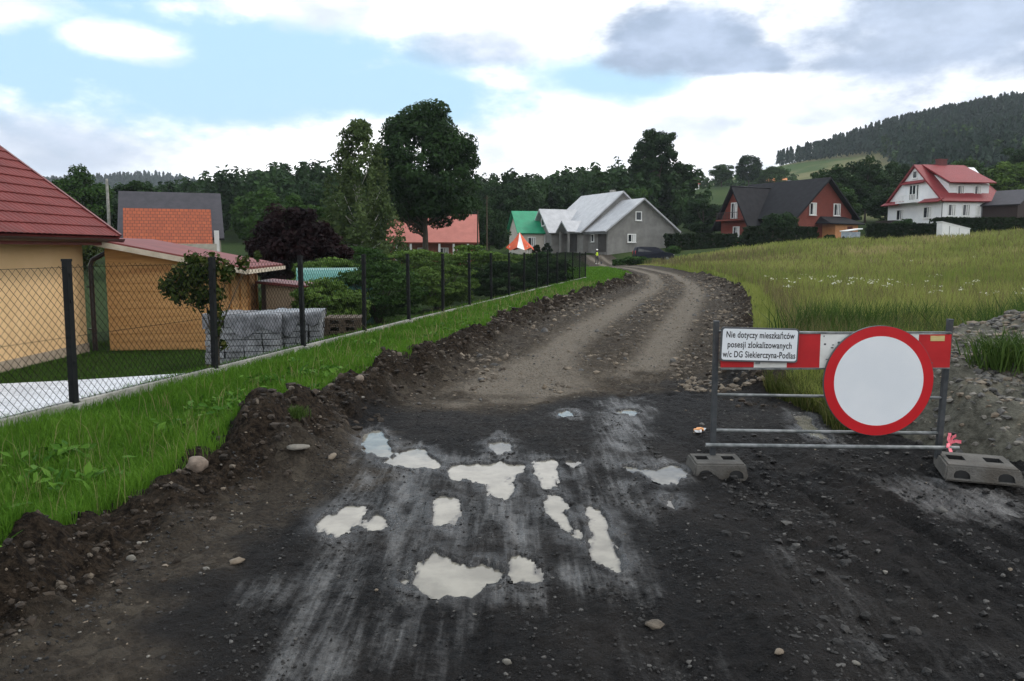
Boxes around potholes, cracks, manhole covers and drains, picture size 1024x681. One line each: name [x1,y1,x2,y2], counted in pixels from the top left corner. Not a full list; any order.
pothole [353,427,399,459]
pothole [479,437,520,455]
pothole [354,509,402,533]
pothole [500,550,552,590]
pothole [525,456,567,491]
pothole [438,459,530,501]
pothole [553,409,582,417]
pothole [575,503,640,576]
pothole [386,545,510,601]
pothole [422,491,469,527]
pothole [374,446,449,470]
pothole [306,502,371,540]
